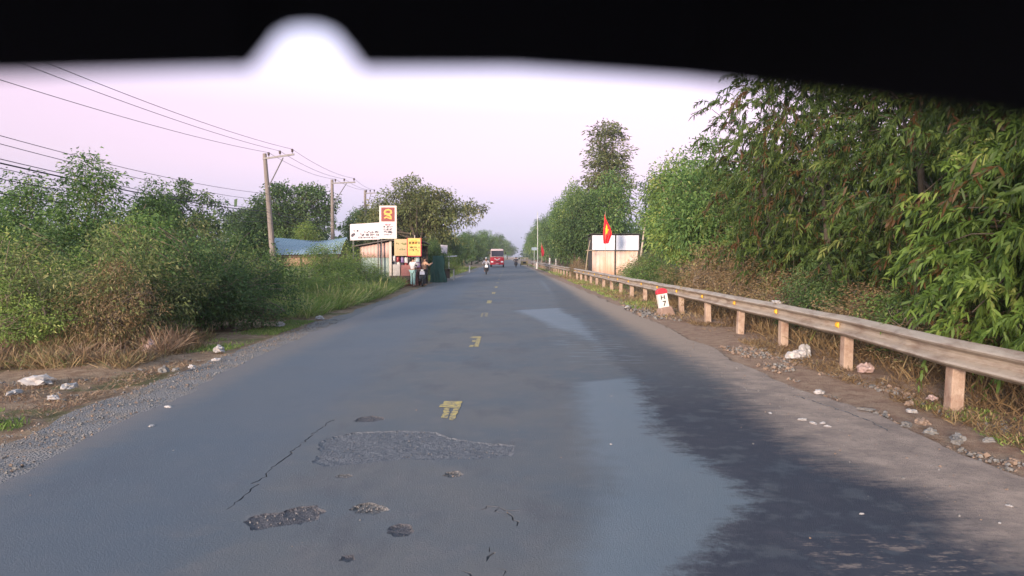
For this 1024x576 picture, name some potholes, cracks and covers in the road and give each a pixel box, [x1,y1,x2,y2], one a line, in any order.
crack [793,395,888,431]
crack [226,419,335,510]
pothole [387,524,414,537]
pothole [243,505,326,531]
pothole [349,502,389,514]
crack [461,549,507,576]
crack [478,506,519,527]
